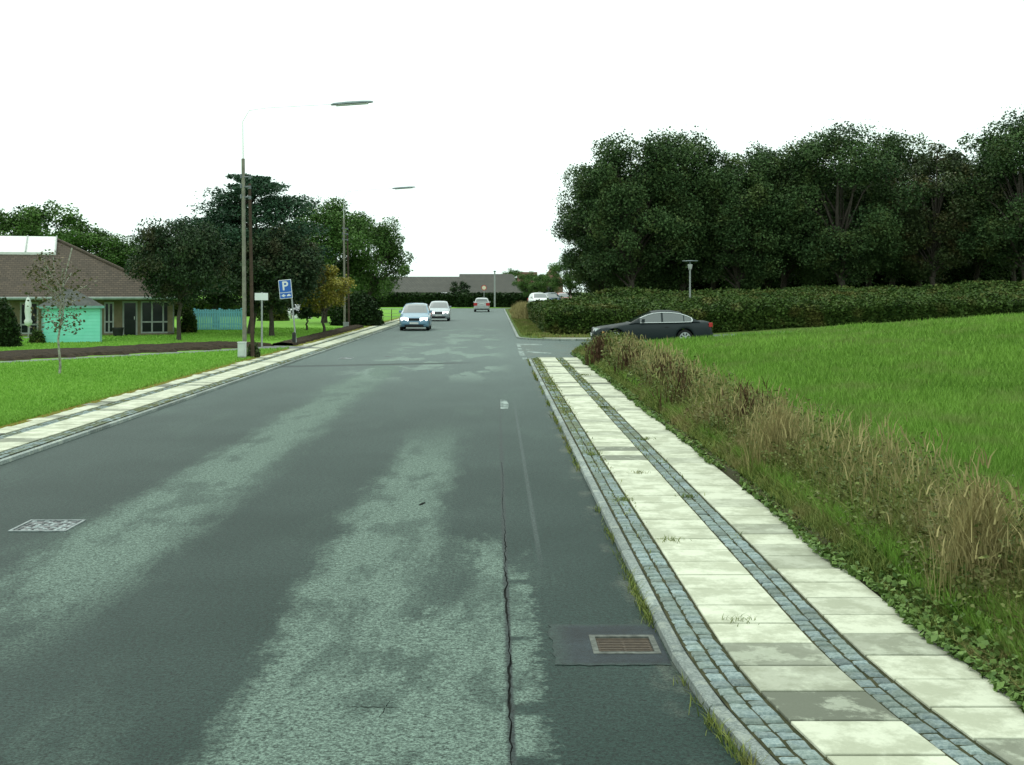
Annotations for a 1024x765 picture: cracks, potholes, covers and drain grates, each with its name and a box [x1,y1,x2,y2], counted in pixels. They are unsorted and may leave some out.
manhole cover [8,520,86,532]
drain grate [589,635,662,654]
crack [502,471,513,765]
